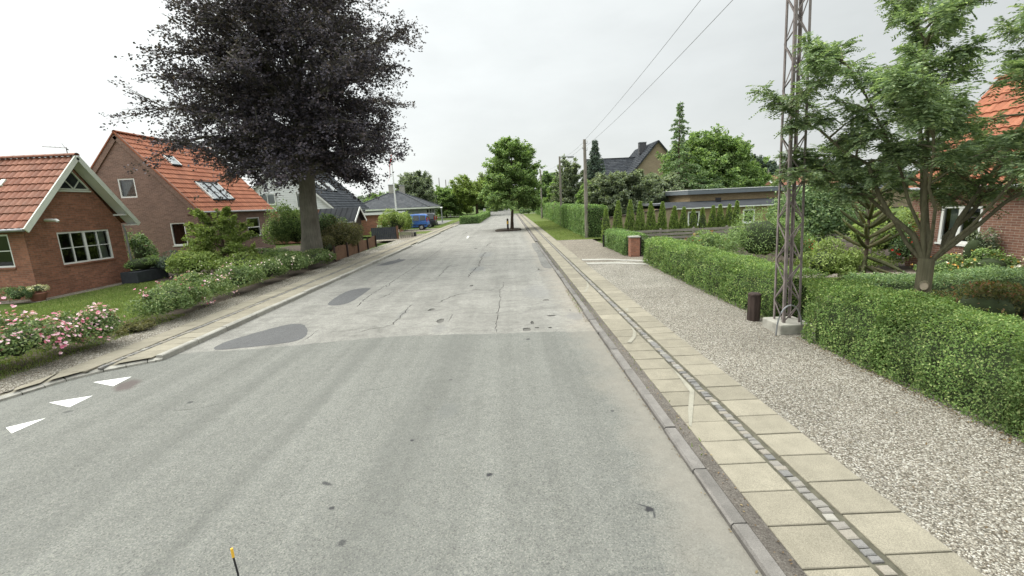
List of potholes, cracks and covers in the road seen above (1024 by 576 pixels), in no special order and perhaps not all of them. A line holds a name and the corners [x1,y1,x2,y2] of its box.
crack [439,243,504,333]
